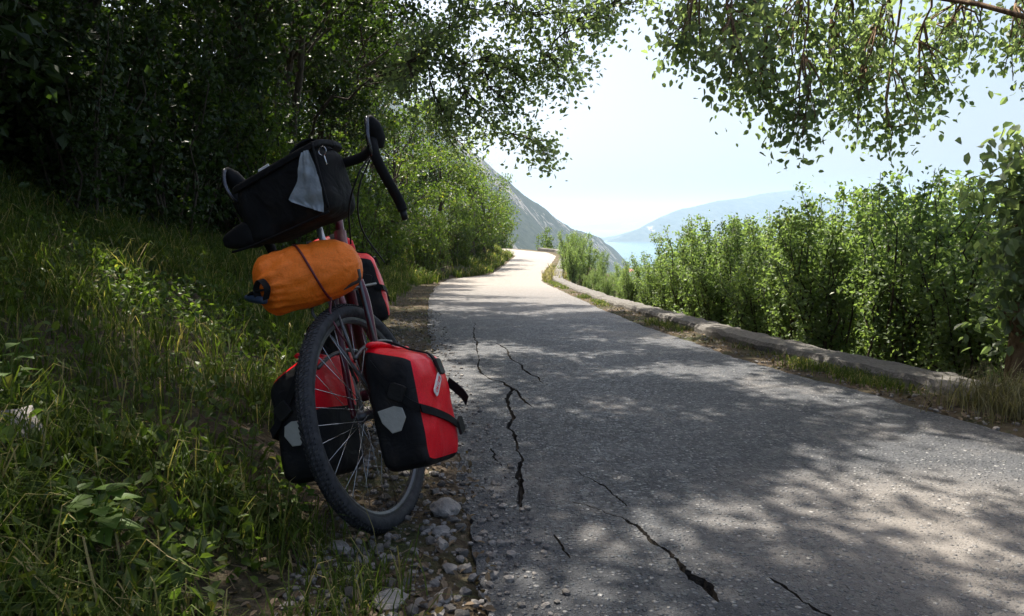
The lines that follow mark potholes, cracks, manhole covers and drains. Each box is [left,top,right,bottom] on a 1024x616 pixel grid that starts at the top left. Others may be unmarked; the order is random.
crack [574,470,719,602]
crack [472,324,541,507]
crack [770,578,830,616]
